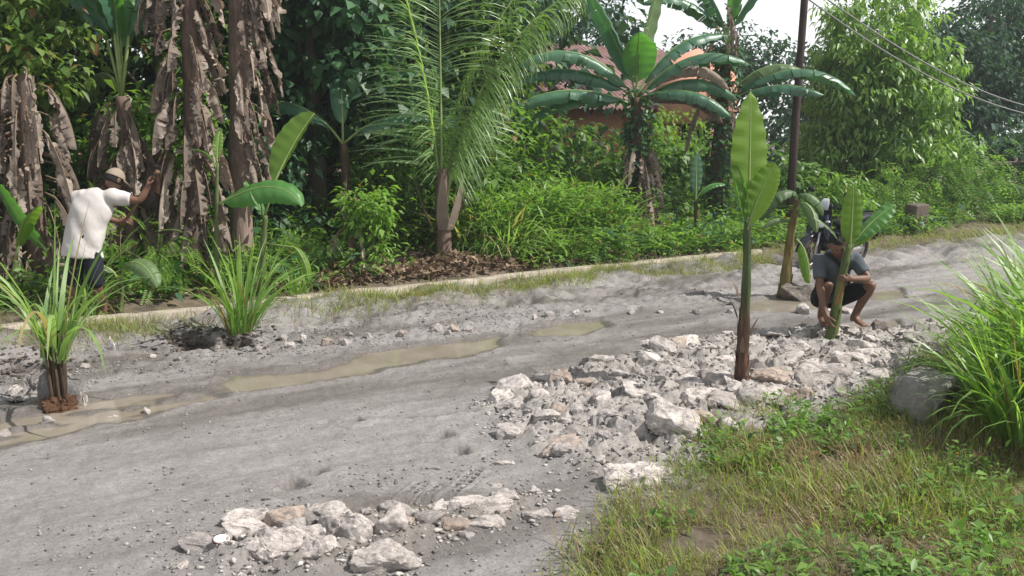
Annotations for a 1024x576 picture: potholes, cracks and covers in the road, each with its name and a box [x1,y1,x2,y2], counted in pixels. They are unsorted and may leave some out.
pothole [519,316,620,339]
pothole [730,293,818,313]
pothole [155,324,228,354]
pothole [0,384,237,453]
